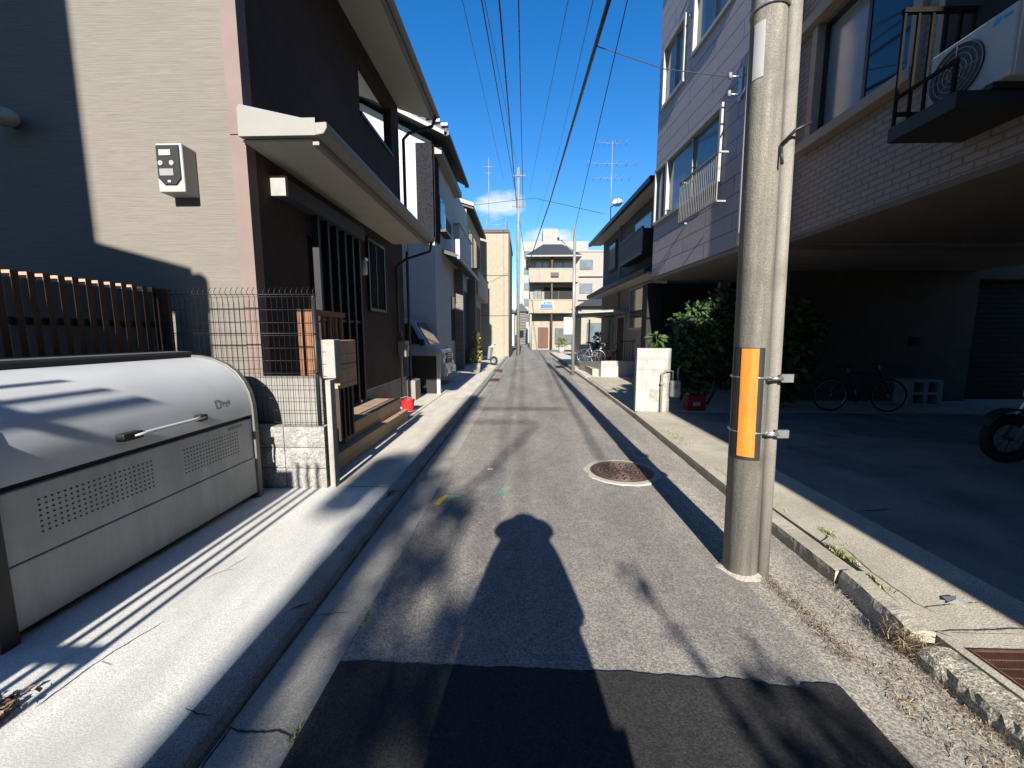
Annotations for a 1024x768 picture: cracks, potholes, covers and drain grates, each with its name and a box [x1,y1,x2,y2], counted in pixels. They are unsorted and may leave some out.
crack [36,621,164,707]
crack [185,707,294,768]
manhole cover [583,460,662,486]
drain grate [968,649,1024,690]
